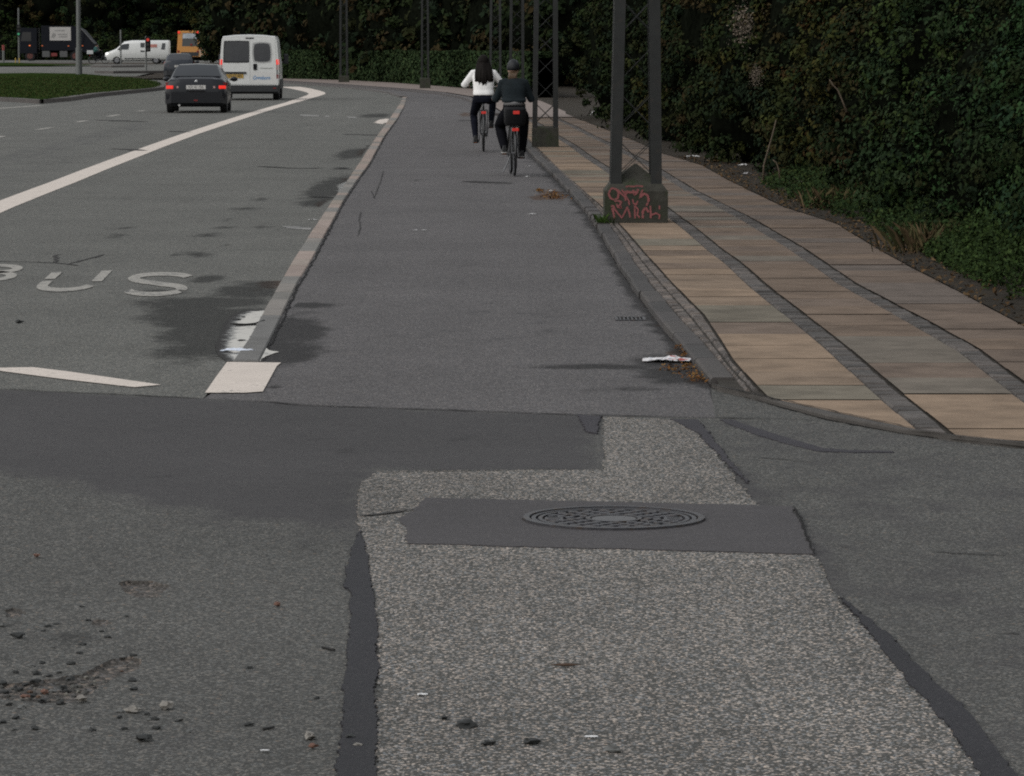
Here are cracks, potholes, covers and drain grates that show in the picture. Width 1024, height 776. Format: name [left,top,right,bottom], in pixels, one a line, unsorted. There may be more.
manhole cover [523,505,705,530]
pothole [0,656,142,704]
